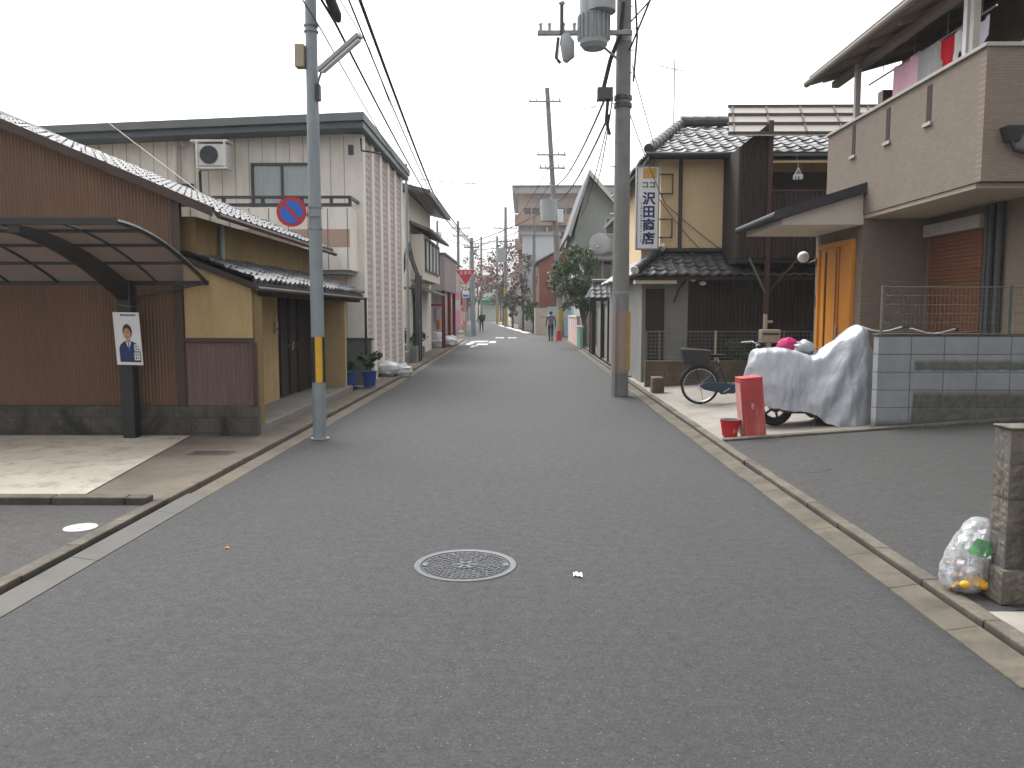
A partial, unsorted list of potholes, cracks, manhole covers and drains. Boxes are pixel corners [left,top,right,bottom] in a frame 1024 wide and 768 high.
manhole cover [62,523,98,533]
manhole cover [414,549,516,582]
